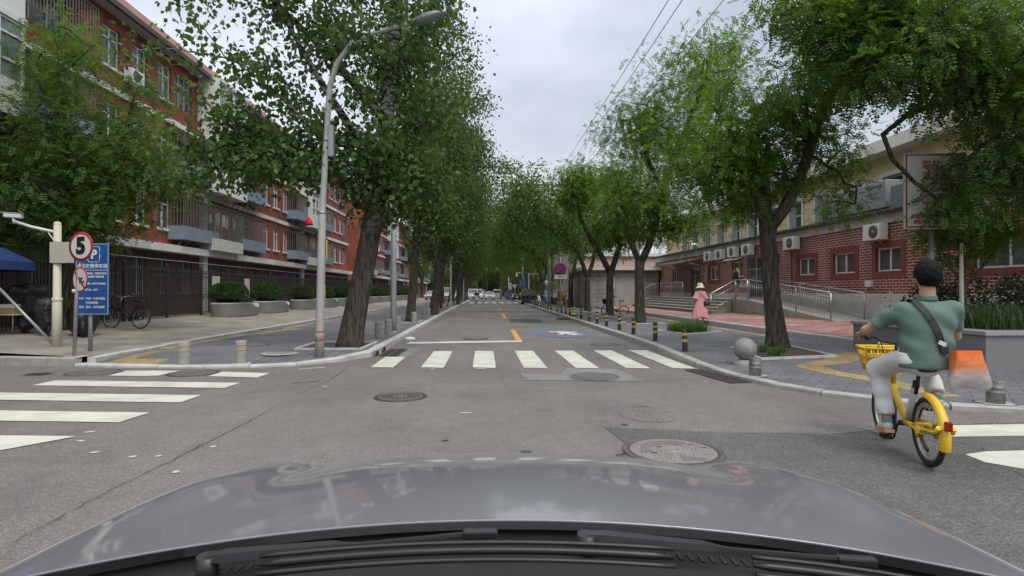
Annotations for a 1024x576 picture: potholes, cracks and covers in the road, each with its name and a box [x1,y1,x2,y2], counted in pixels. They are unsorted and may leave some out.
manhole cover [374,391,427,402]
drain grate [685,369,752,383]
manhole cover [166,369,220,377]
manhole cover [622,437,726,466]
